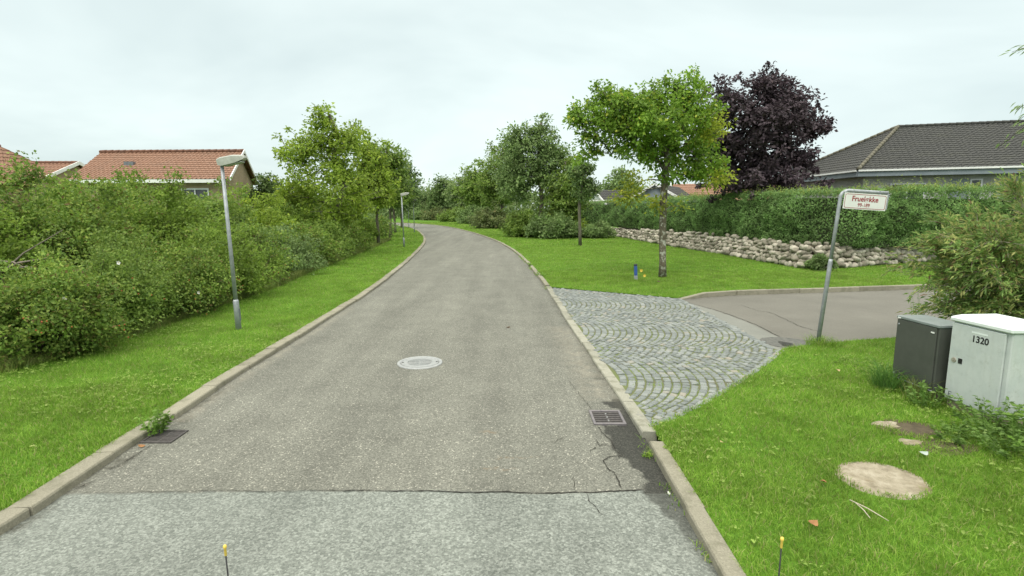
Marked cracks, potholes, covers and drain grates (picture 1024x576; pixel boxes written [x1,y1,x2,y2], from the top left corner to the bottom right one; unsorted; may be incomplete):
drain grate [589,410,627,426]
manhole cover [835,461,933,500]
crack [74,425,644,515]
drain grate [139,430,189,443]
manhole cover [397,356,442,369]
